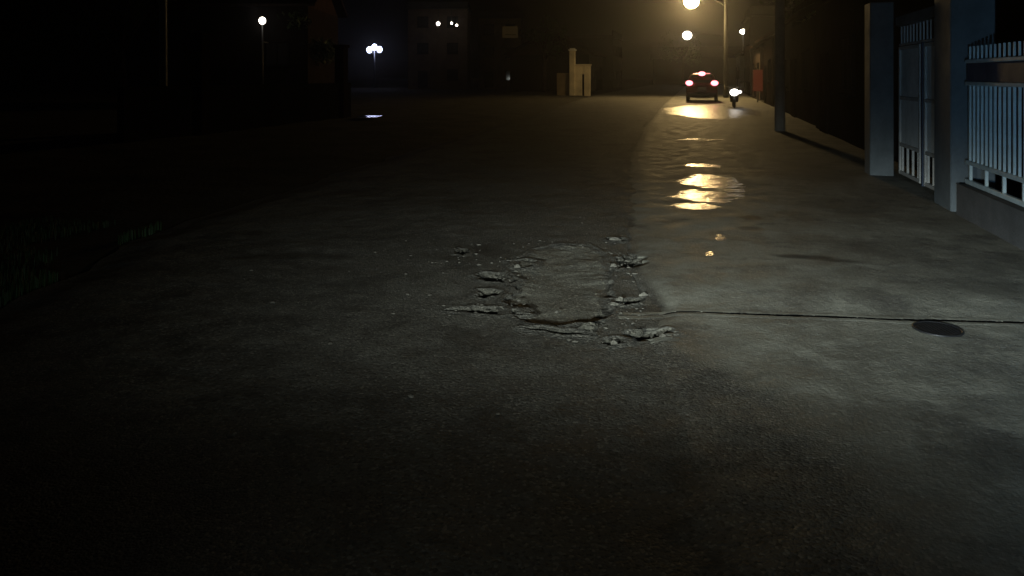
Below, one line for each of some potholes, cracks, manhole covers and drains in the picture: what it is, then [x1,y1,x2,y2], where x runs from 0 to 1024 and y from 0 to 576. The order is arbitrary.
manhole cover [912,321,965,337]
pothole [435,303,538,319]
pothole [511,323,605,339]
pothole [589,334,637,349]
pothole [610,252,643,272]
pothole [494,242,623,331]
pothole [599,294,652,309]
pothole [625,325,689,343]
pothole [448,247,476,257]
pothole [468,270,529,287]
pothole [465,287,512,301]
